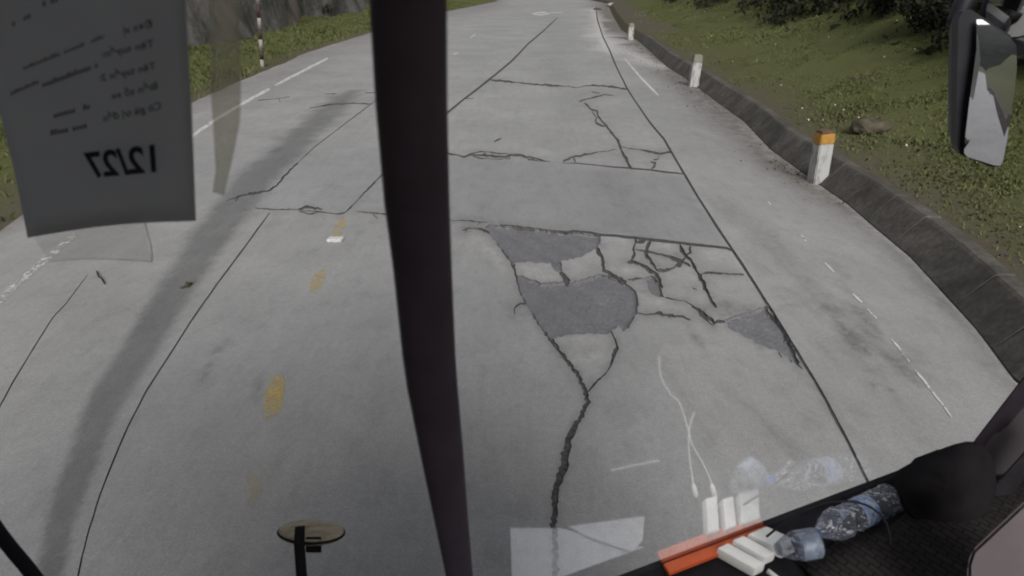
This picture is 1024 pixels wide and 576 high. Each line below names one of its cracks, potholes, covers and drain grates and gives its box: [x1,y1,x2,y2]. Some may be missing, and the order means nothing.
pothole [517,274,639,340]
crack [227,162,802,576]
pothole [485,224,601,272]
pothole [725,306,800,365]
crack [449,79,670,171]
